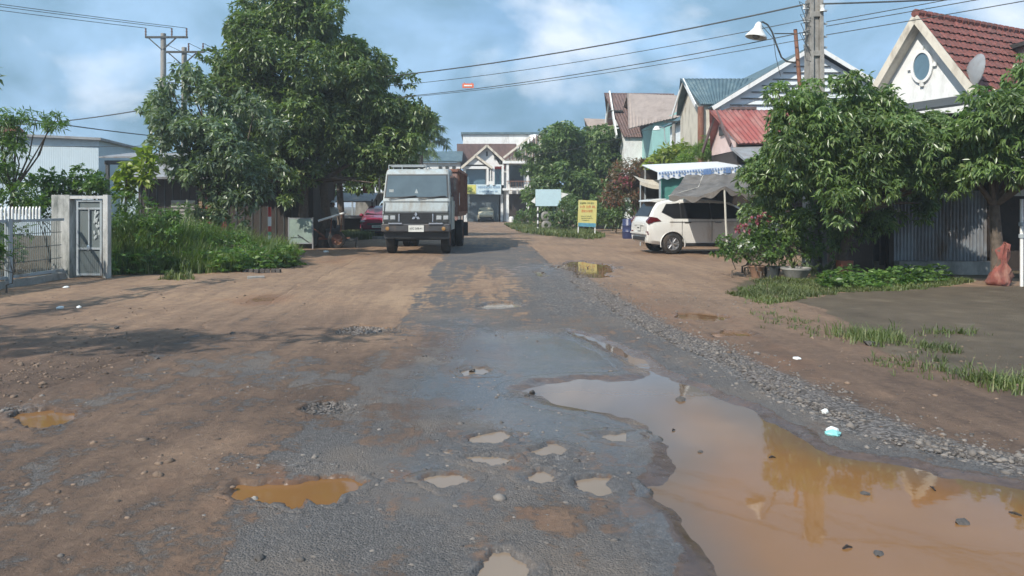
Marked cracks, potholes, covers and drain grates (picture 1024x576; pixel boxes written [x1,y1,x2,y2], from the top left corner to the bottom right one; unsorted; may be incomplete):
pothole [425,446,528,474]
pothole [535,259,640,281]
pothole [494,327,1024,576]
pothole [452,538,553,576]
pothole [313,324,408,338]
pothole [286,397,370,420]
pothole [403,466,489,496]
pothole [451,428,523,448]
pothole [0,405,92,431]
pothole [213,468,382,514]
pothole [448,364,507,378]
